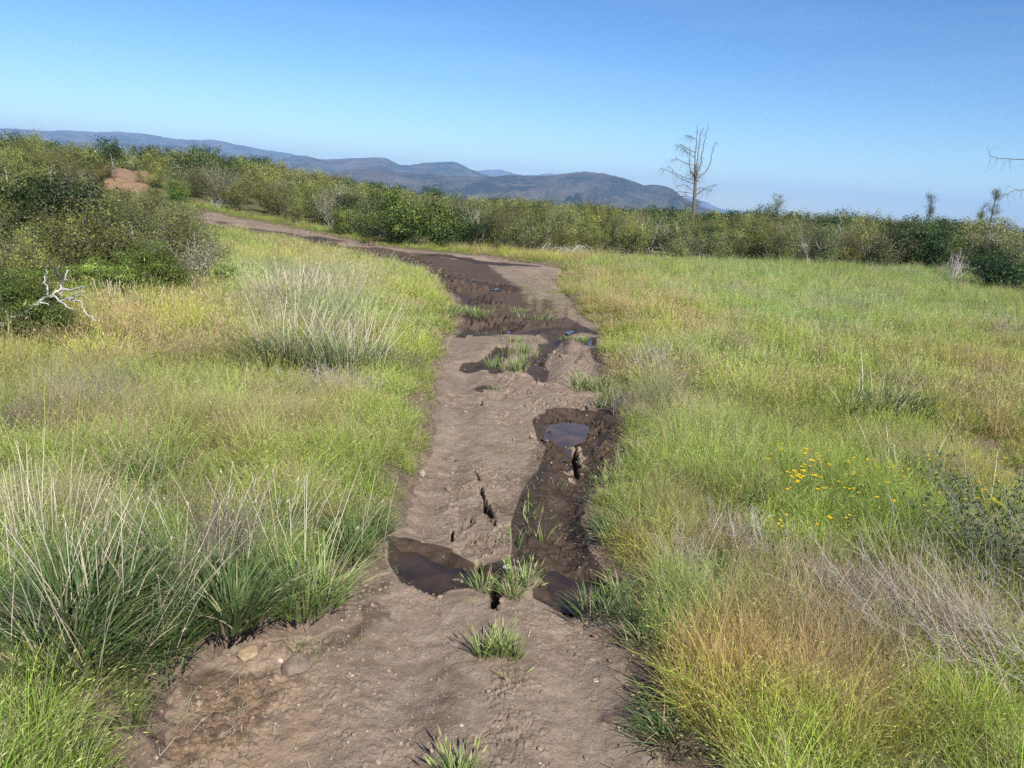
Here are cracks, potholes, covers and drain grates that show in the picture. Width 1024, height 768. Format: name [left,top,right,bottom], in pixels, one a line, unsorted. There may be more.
pothole [530,406,618,466]
crack [567,446,590,480]
pothole [385,535,505,598]
crack [446,469,507,611]
